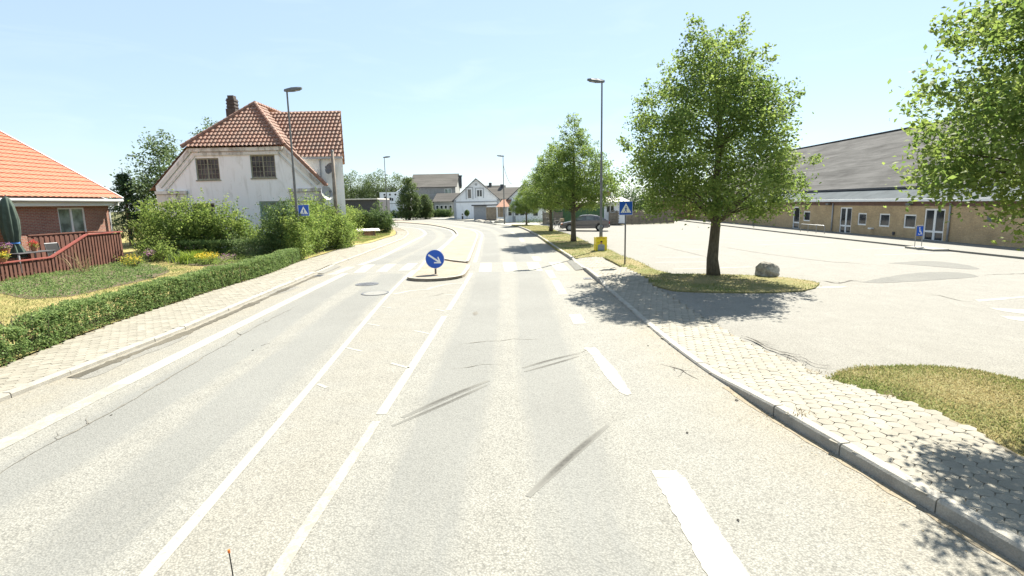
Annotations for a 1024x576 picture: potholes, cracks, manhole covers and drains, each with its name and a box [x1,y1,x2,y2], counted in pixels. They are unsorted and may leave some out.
crack [741,335,829,366]
